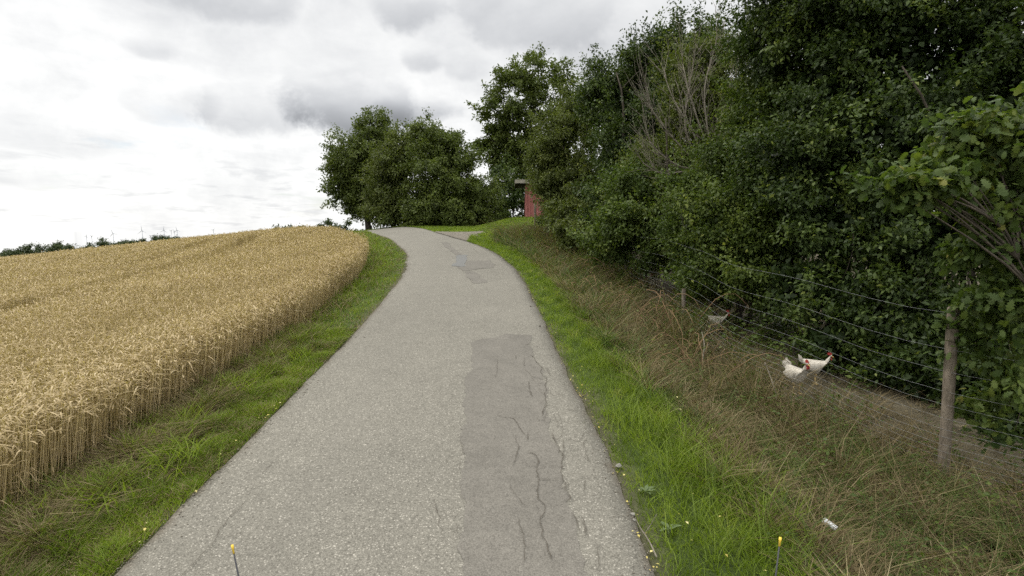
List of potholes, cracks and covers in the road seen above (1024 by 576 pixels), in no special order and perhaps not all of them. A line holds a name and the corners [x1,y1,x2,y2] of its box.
crack [496,357,603,570]
crack [182,462,273,575]
